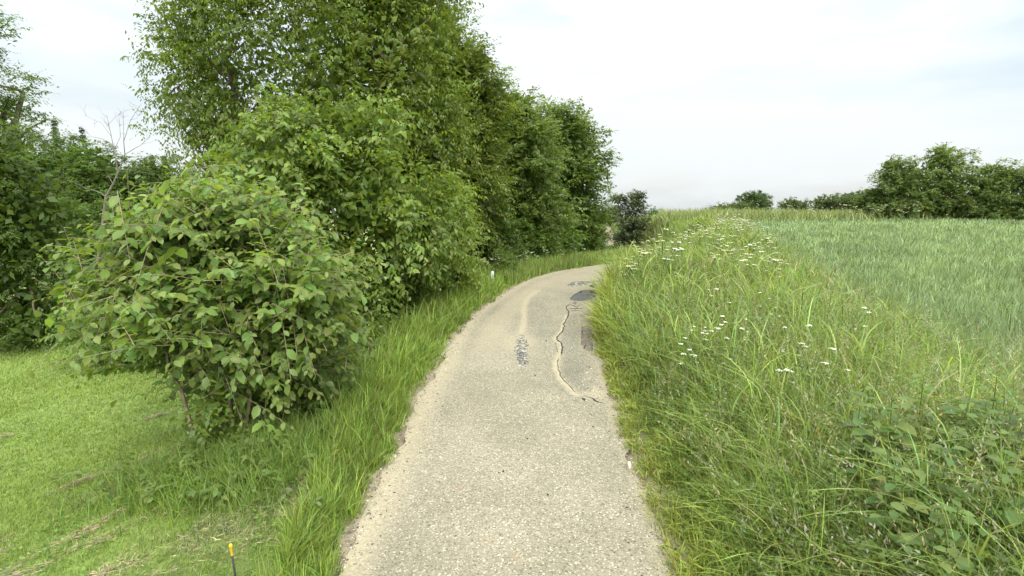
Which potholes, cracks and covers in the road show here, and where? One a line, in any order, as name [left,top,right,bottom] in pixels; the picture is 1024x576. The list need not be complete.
crack [555,302,602,403]
